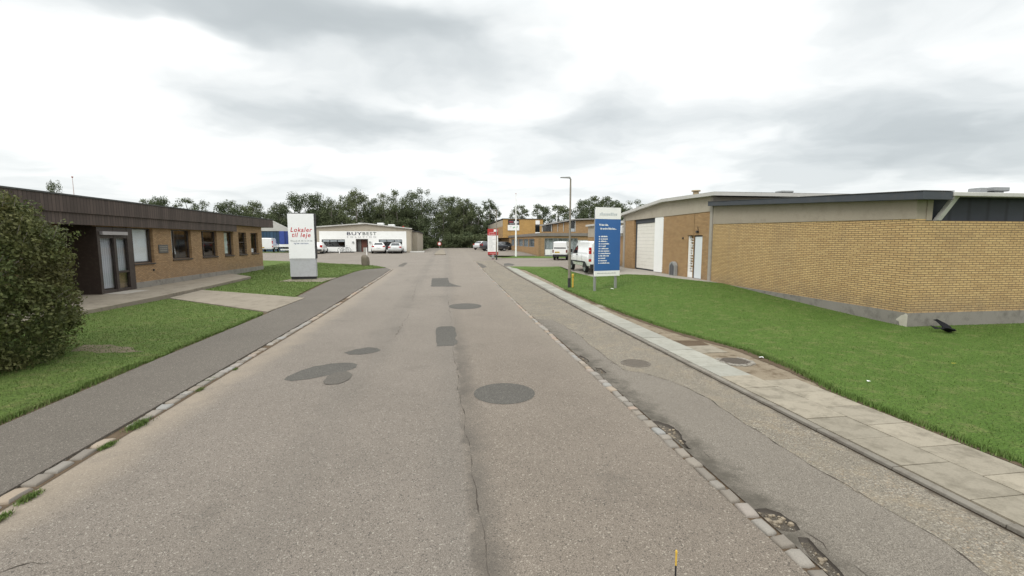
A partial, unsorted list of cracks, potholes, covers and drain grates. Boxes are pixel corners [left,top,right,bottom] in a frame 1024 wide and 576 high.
pothole [755,508,800,532]
crack [447,295,489,574]
manhole cover [620,359,651,367]
pothole [653,421,690,449]
pothole [798,537,844,576]
